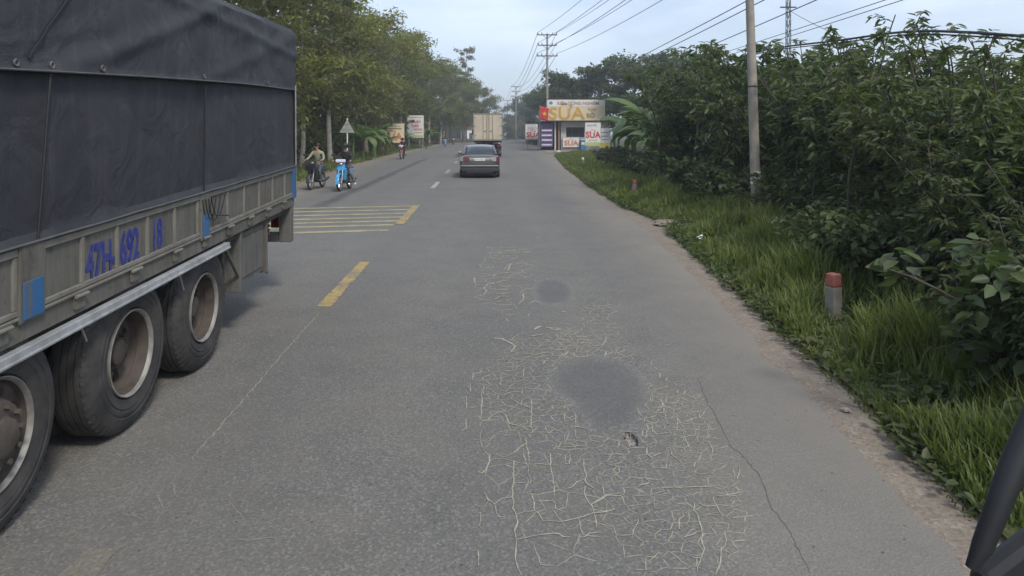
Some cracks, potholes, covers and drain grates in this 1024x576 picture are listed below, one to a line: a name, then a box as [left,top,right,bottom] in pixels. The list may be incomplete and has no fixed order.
crack [118,314,318,526]
crack [462,247,809,575]
pothole [622,432,638,447]
